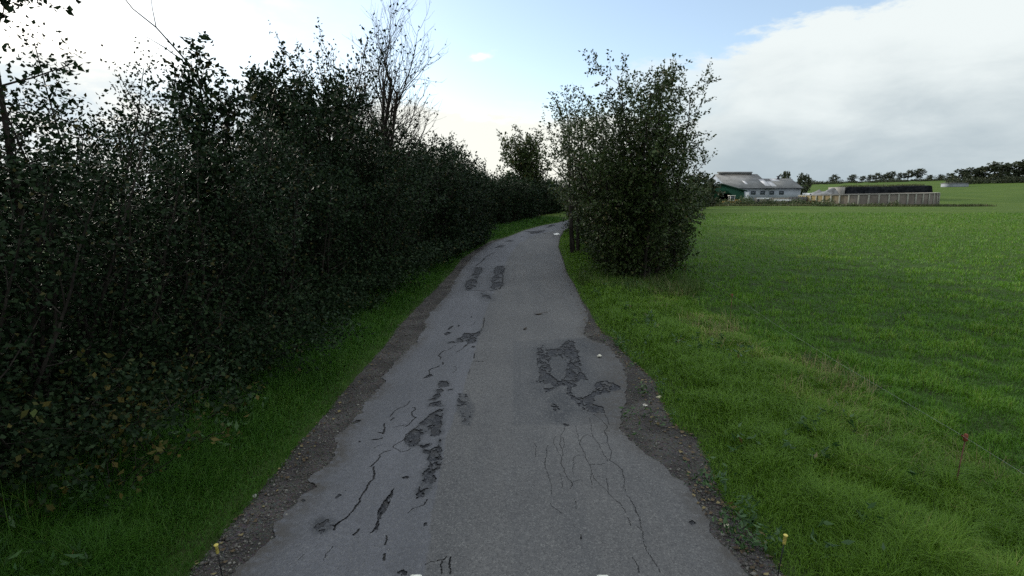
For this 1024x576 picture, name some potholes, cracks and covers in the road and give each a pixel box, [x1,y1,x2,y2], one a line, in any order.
crack [424,318,485,378]
crack [325,400,419,561]
pothole [536,340,621,413]
crack [534,414,661,573]
pothole [490,266,504,289]
pothole [465,267,482,290]
pothole [430,381,452,401]
pothole [404,408,444,499]
crack [425,556,452,574]
